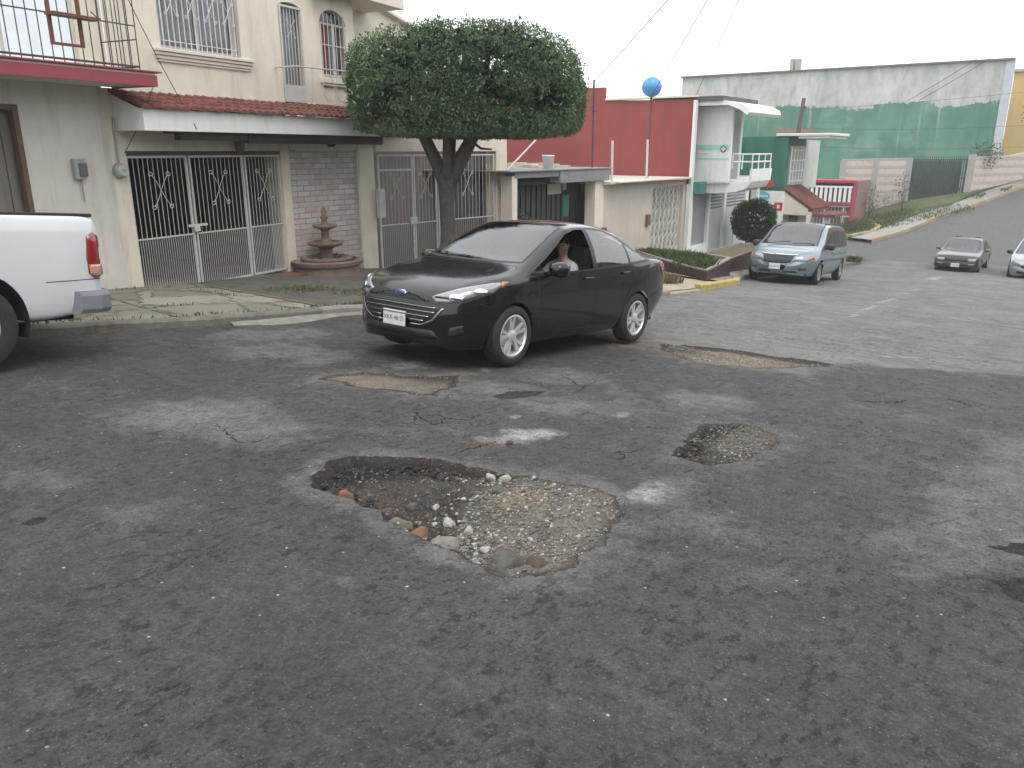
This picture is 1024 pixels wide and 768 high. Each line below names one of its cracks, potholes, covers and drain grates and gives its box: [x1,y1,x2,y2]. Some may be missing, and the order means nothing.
crack [215,423,271,443]
pothole [493,390,546,400]
pothole [988,576,1024,602]
pothole [317,371,460,397]
pothole [671,423,779,466]
pothole [986,543,1024,556]
pothole [308,456,625,578]
pothole [659,344,837,369]
crack [386,412,492,427]
